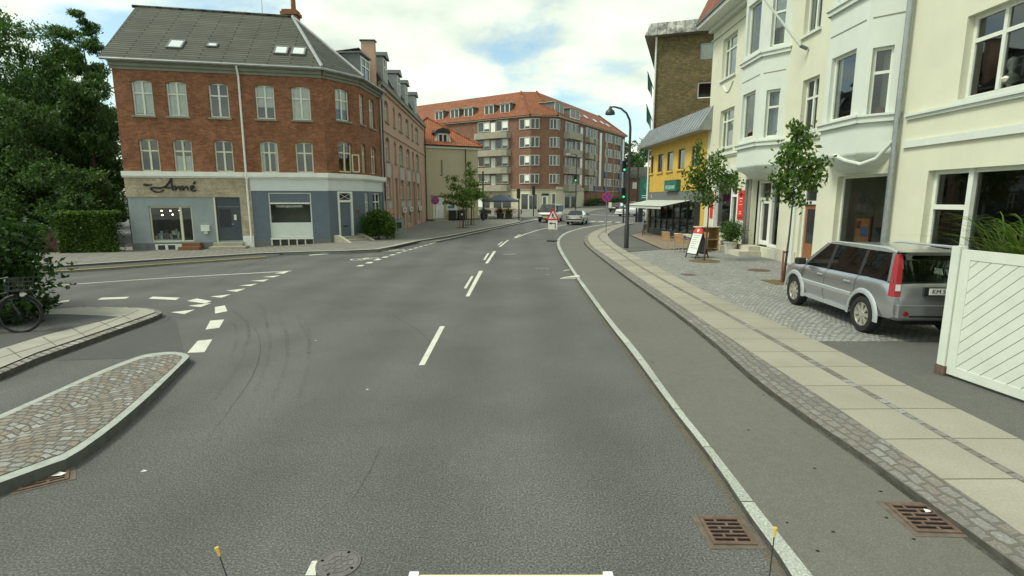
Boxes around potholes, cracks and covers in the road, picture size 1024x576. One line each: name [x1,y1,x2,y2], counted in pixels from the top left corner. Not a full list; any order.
drain grate [10,466,76,495]
manhole cover [315,549,361,576]
drain grate [691,515,766,549]
drain grate [876,501,969,538]
